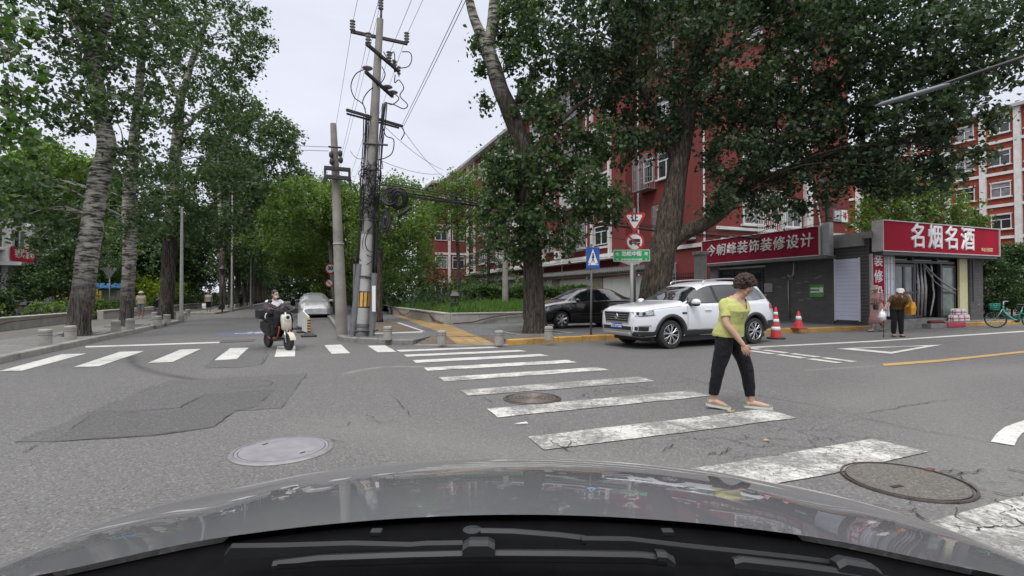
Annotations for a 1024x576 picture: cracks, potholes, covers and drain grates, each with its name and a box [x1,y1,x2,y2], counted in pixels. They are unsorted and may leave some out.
manhole cover [503,392,561,405]
crack [874,468,1024,530]
manhole cover [840,461,981,503]
manhole cover [227,436,334,466]
